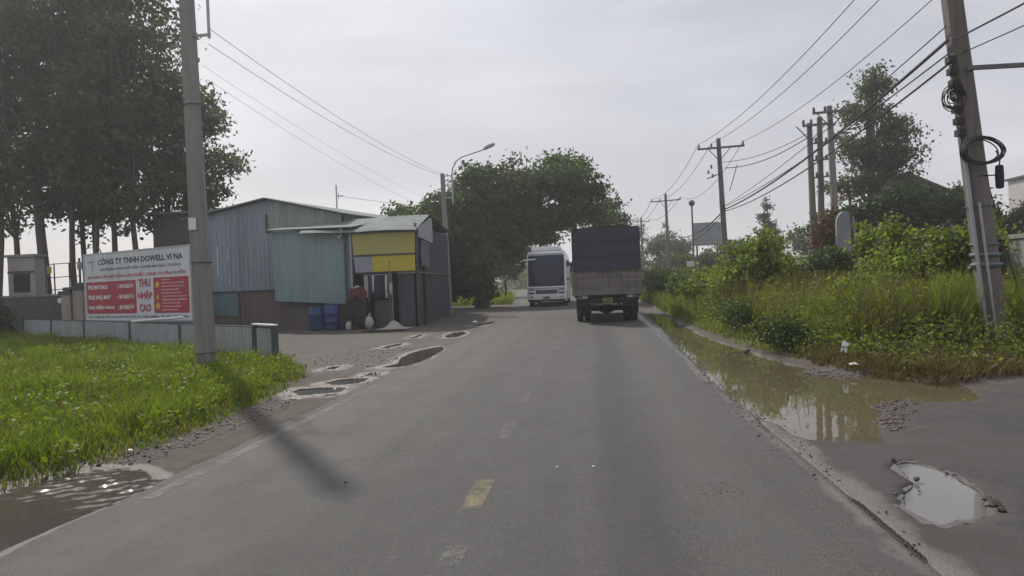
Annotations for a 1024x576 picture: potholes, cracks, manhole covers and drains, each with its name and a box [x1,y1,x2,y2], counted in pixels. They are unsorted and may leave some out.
pothole [890,461,1007,528]
pothole [283,385,351,399]
pothole [368,346,446,369]
pothole [311,377,379,386]
